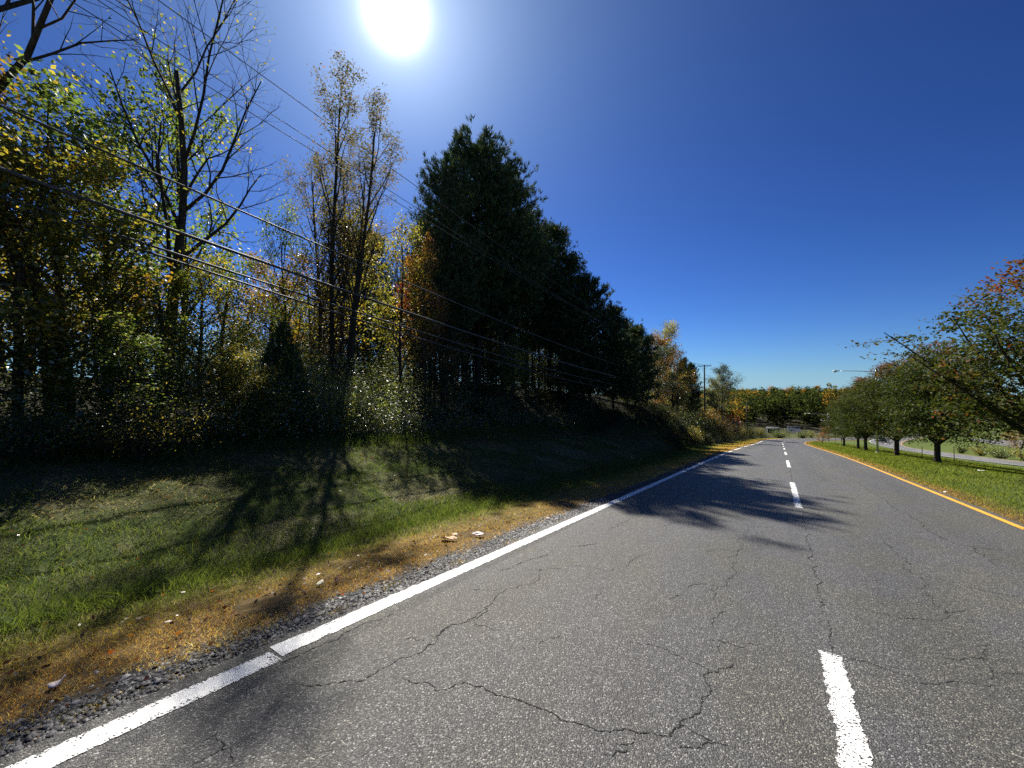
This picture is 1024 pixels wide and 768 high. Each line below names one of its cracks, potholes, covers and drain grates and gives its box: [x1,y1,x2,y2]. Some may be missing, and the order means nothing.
crack [849,645,1019,687]
crack [290,519,756,756]
crack [832,544,995,621]
